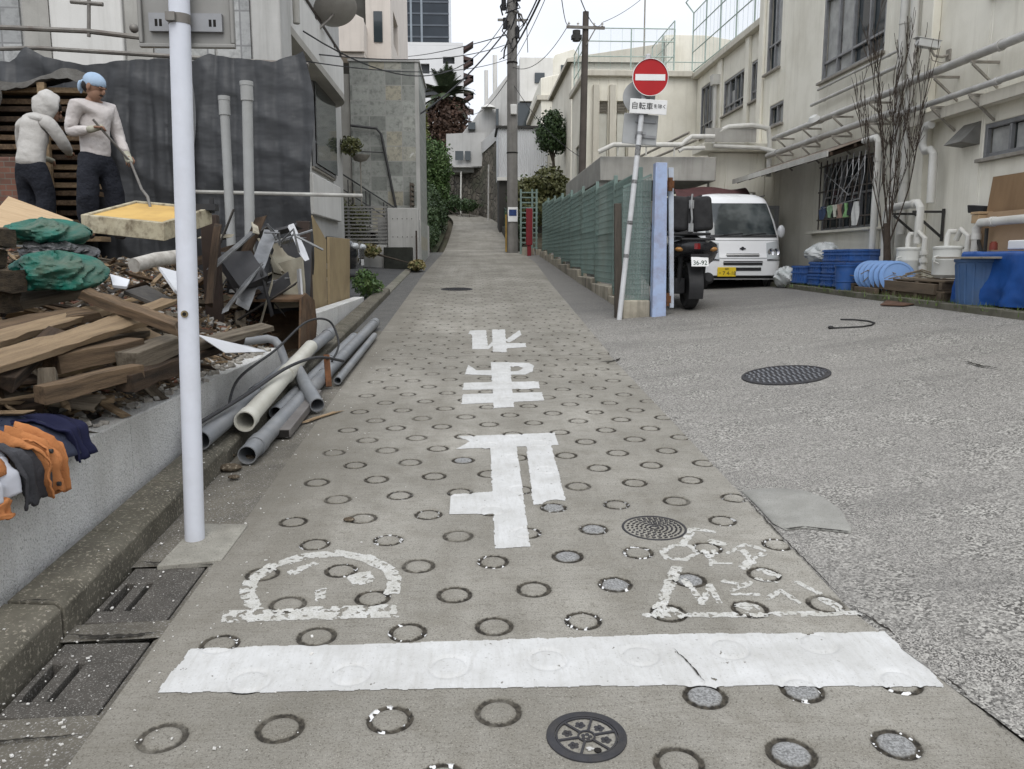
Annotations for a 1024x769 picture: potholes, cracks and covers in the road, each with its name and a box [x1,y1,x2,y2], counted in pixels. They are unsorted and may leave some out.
manhole cover [622,516,687,541]
manhole cover [741,365,831,385]
manhole cover [546,712,627,763]
